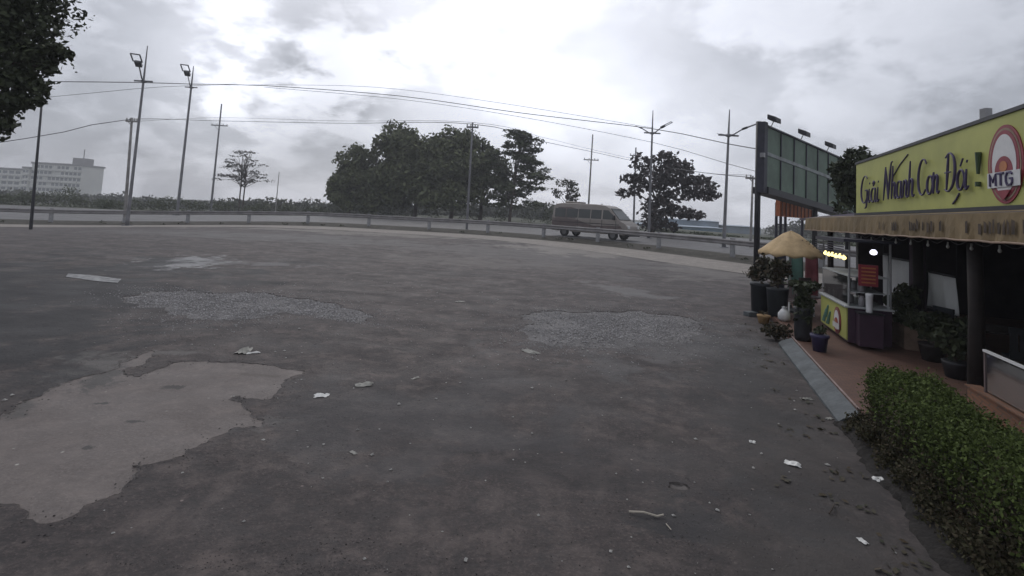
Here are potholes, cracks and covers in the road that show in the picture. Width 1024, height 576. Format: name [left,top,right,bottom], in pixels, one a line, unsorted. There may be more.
pothole [668,482,690,490]
pothole [35,282,436,341]
pothole [426,303,769,375]
